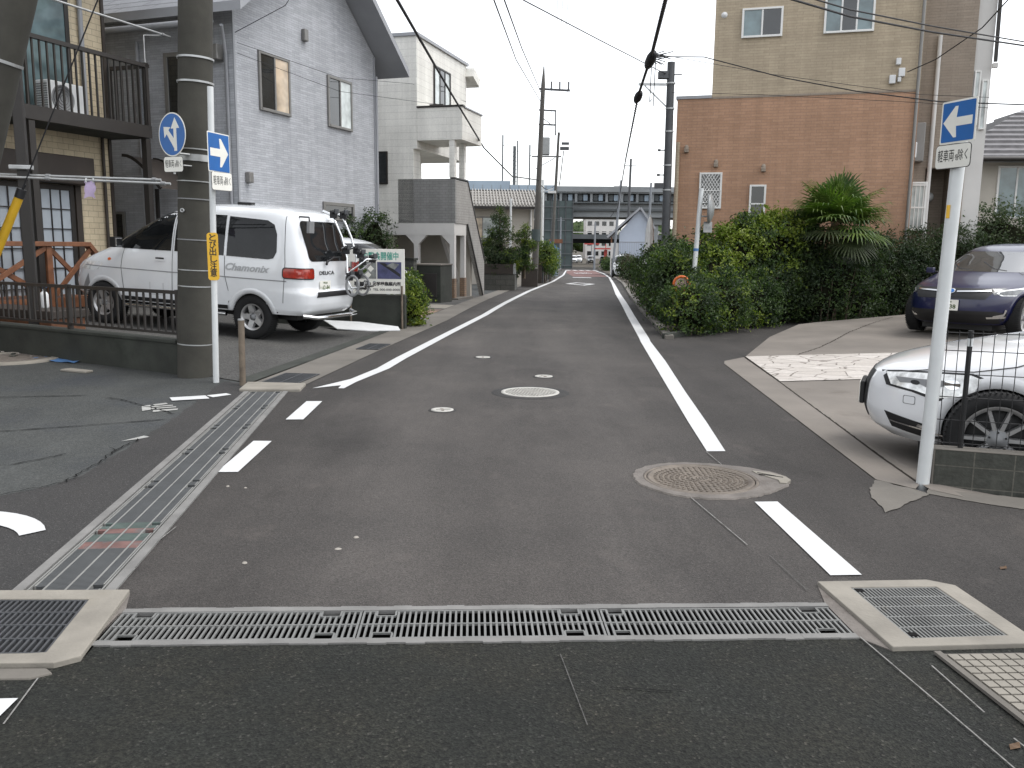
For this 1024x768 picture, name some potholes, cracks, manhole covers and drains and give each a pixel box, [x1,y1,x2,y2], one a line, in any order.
drain grate [356,609,608,638]
crack [5,397,175,431]
drain grate [599,607,852,636]
drain grate [97,611,363,641]
manhole cover [491,386,569,400]
manhole cover [632,462,791,500]
drain grate [262,373,319,383]
